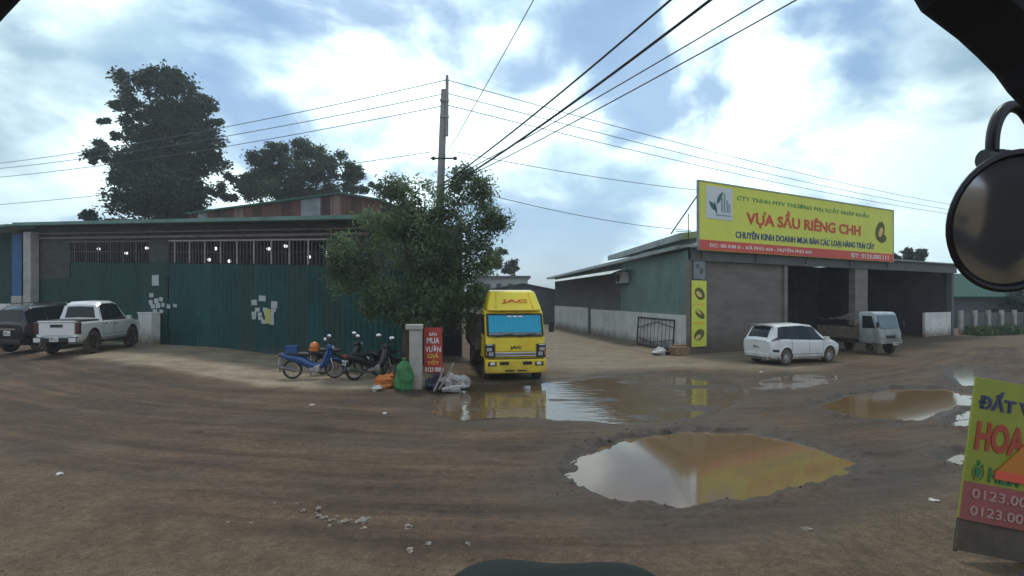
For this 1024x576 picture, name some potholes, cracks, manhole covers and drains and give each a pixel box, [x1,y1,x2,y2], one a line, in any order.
pothole [411,372,758,425]
pothole [745,371,849,391]
pothole [797,384,973,423]
pothole [544,423,883,514]
